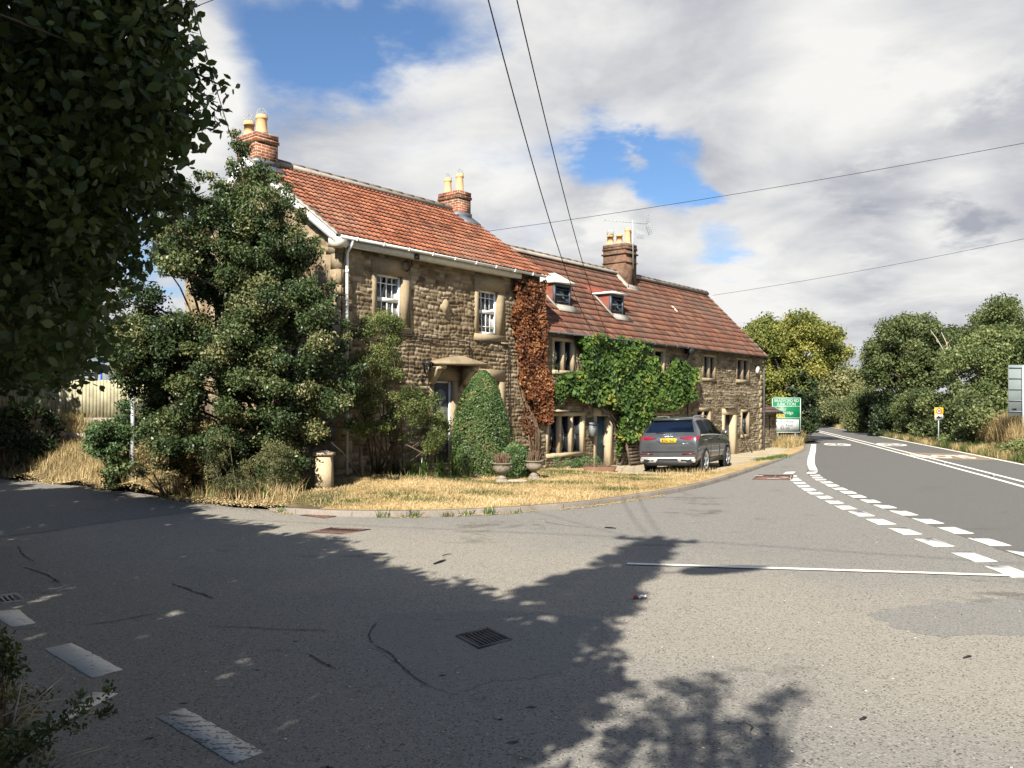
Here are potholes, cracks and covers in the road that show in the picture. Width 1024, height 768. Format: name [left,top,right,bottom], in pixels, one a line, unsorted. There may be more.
drain grate [456,626,512,649]
drain grate [0,593,25,604]
crack [368,624,430,687]
